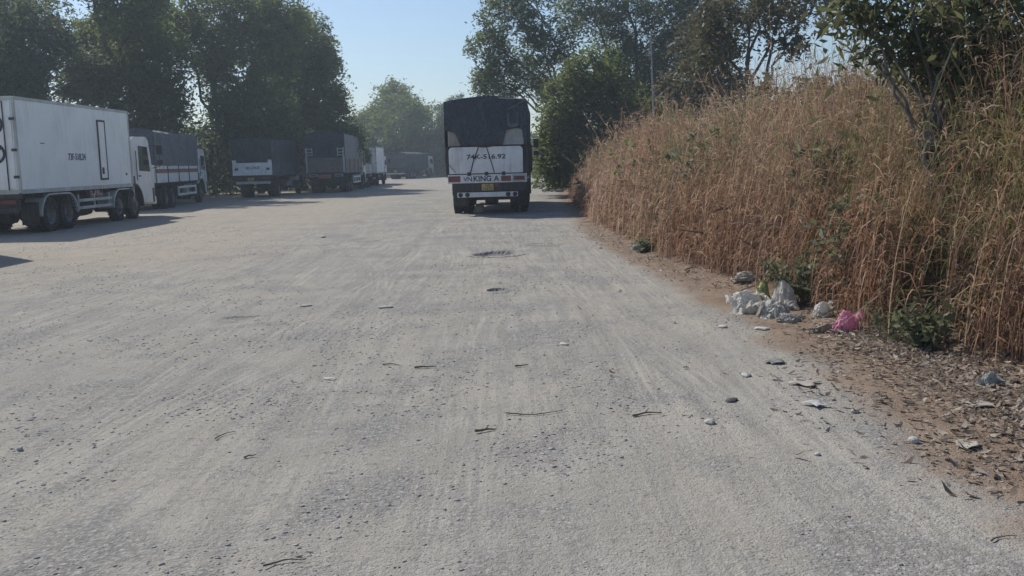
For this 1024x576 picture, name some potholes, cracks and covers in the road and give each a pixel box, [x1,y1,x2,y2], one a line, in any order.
pothole [468,250,526,258]
